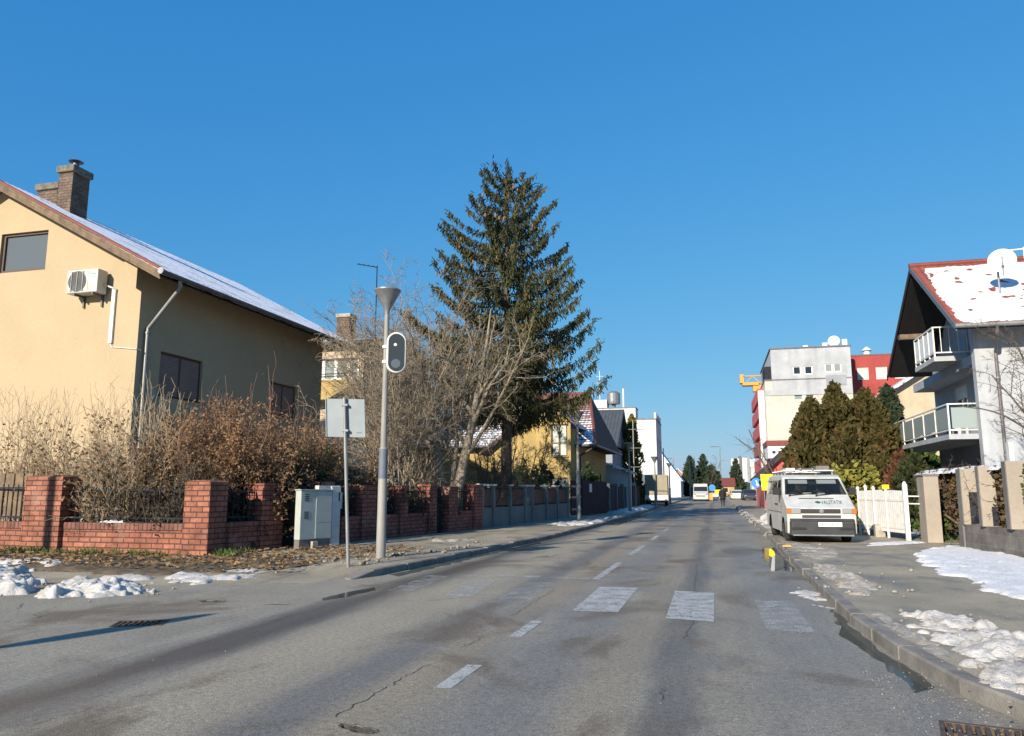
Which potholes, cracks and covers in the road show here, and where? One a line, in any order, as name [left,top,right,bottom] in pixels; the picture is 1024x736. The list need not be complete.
pothole [338,723,379,734]
drain grate [938,720,1024,736]
drain grate [108,619,170,627]
crack [335,594,548,717]
